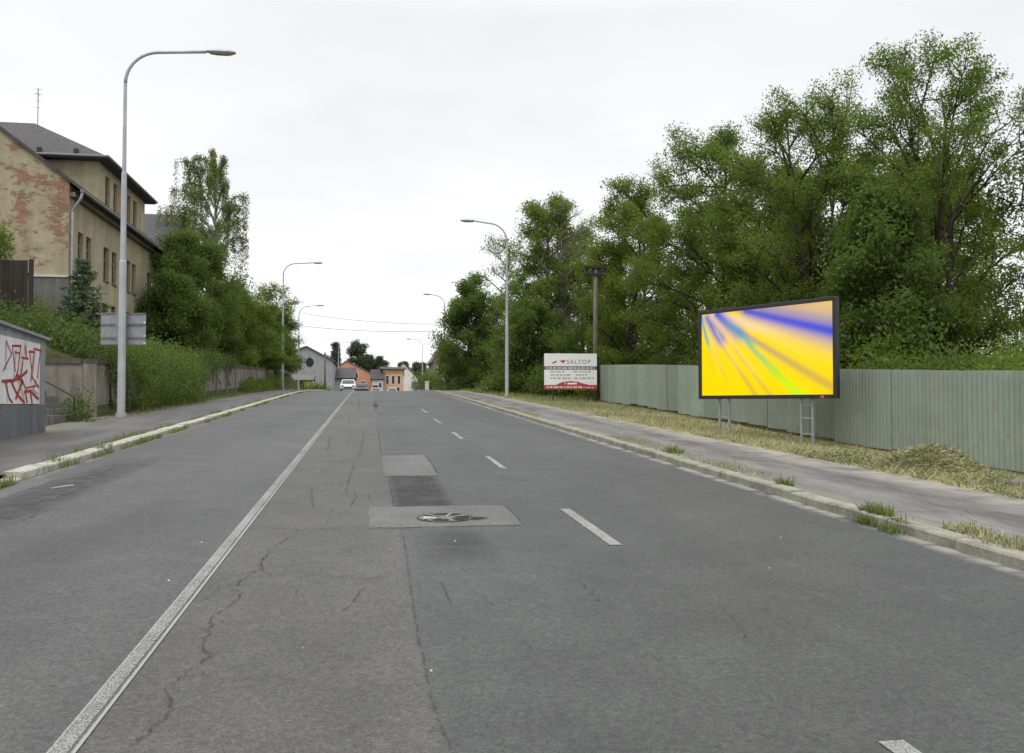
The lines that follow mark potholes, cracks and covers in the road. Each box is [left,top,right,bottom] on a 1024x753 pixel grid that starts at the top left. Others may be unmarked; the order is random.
manhole cover [416,513,474,522]
